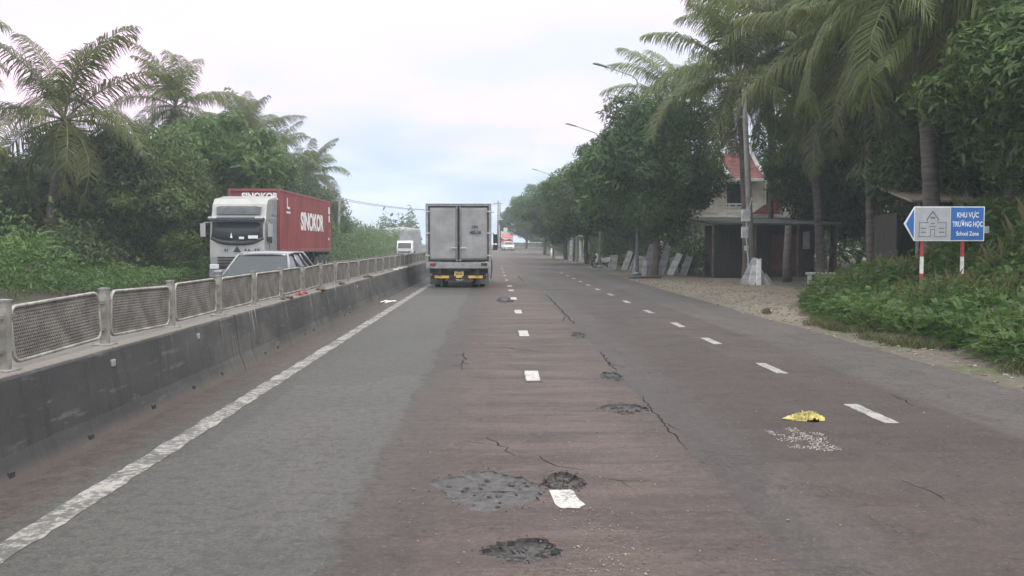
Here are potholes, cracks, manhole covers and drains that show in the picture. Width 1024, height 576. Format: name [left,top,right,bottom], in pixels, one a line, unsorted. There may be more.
pothole [535,470,587,491]
pothole [470,535,569,565]
pothole [600,371,623,383]
pothole [597,402,654,416]
